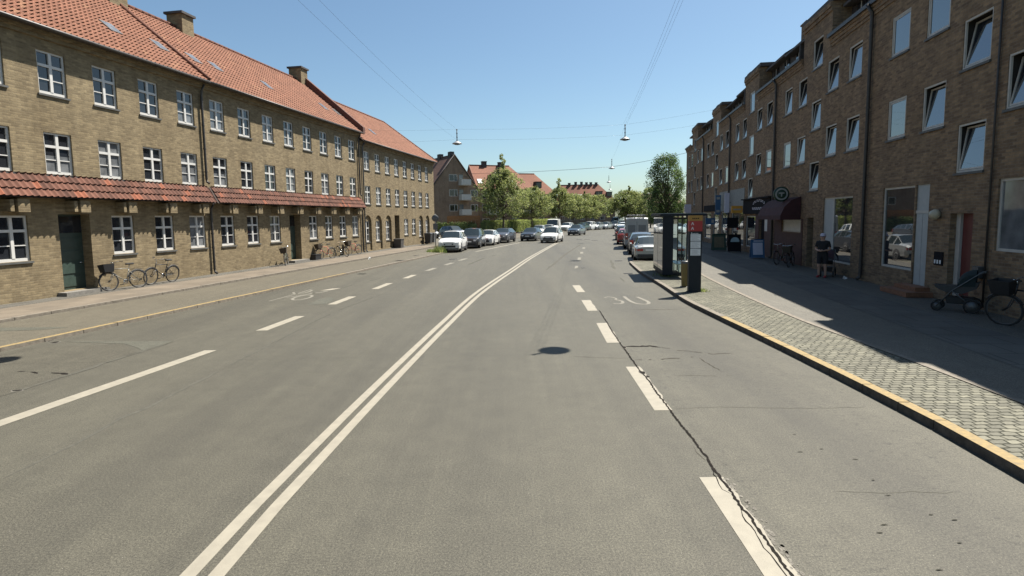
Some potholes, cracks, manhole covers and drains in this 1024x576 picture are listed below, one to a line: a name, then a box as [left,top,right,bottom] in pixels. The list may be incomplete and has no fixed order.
crack [625,345,733,376]
crack [741,510,787,576]
